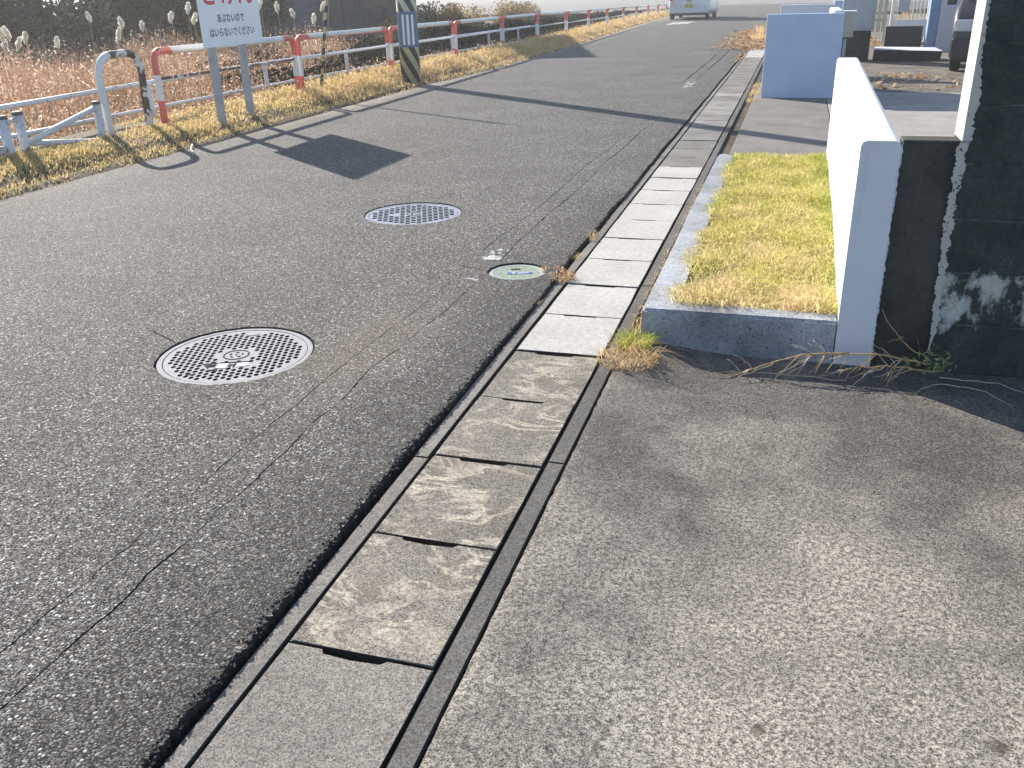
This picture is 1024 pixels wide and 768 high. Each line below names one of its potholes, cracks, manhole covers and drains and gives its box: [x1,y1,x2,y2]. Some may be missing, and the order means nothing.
manhole cover [156,329,314,385]
manhole cover [489,265,545,280]
crack [483,123,653,258]
crack [0,281,470,710]
manhole cover [365,203,461,225]
